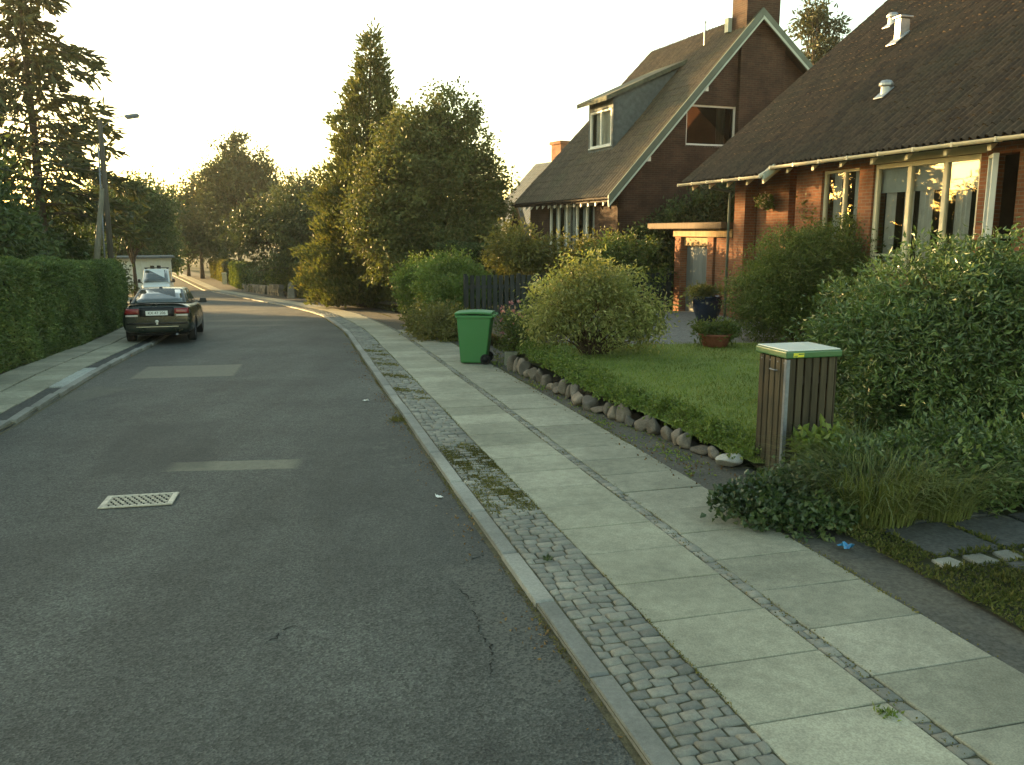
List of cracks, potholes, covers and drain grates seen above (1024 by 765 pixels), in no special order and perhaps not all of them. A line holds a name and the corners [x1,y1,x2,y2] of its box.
crack [452,557,495,677]
